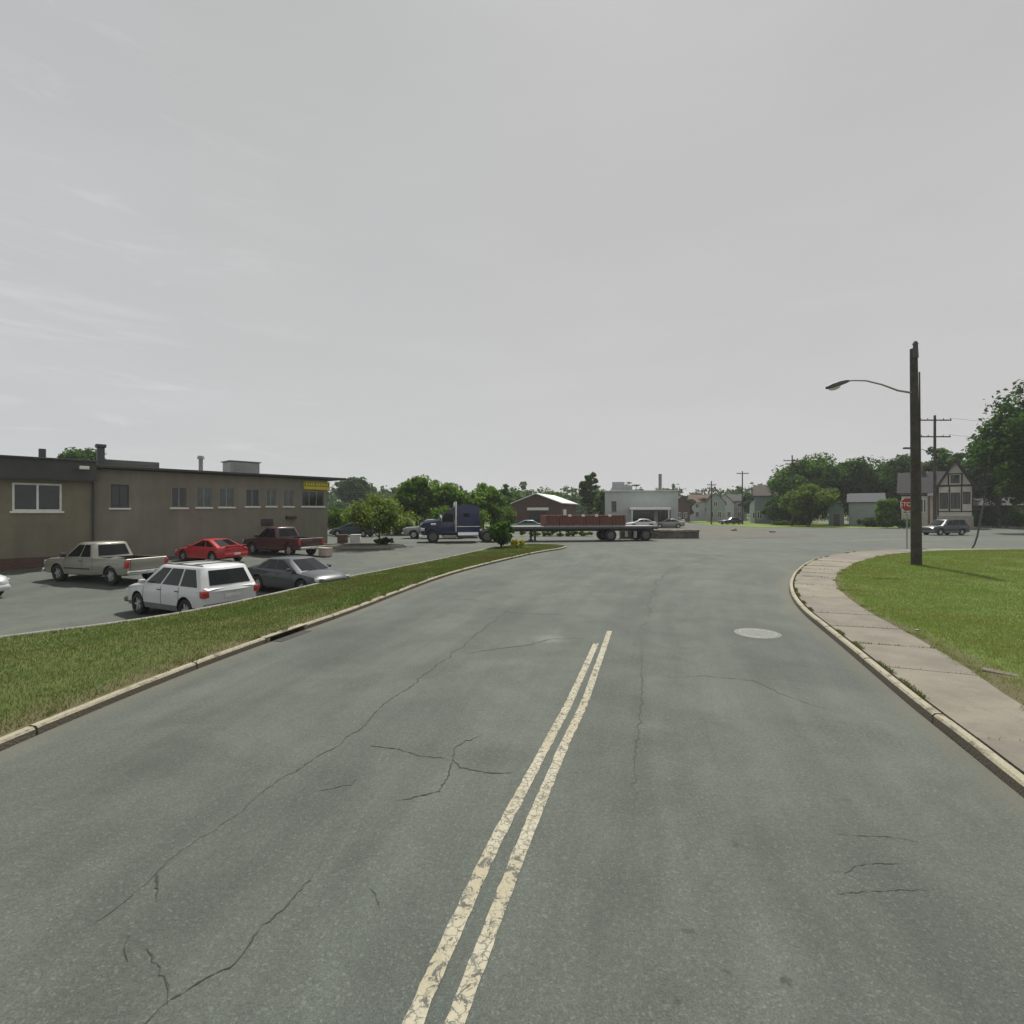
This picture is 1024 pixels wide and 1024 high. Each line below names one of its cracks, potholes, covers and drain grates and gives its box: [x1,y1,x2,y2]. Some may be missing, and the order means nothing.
crack [145,862,322,1024]
crack [630,652,644,800]
drain grate [260,624,311,643]
crack [377,738,510,801]
manhole cover [734,628,782,639]
